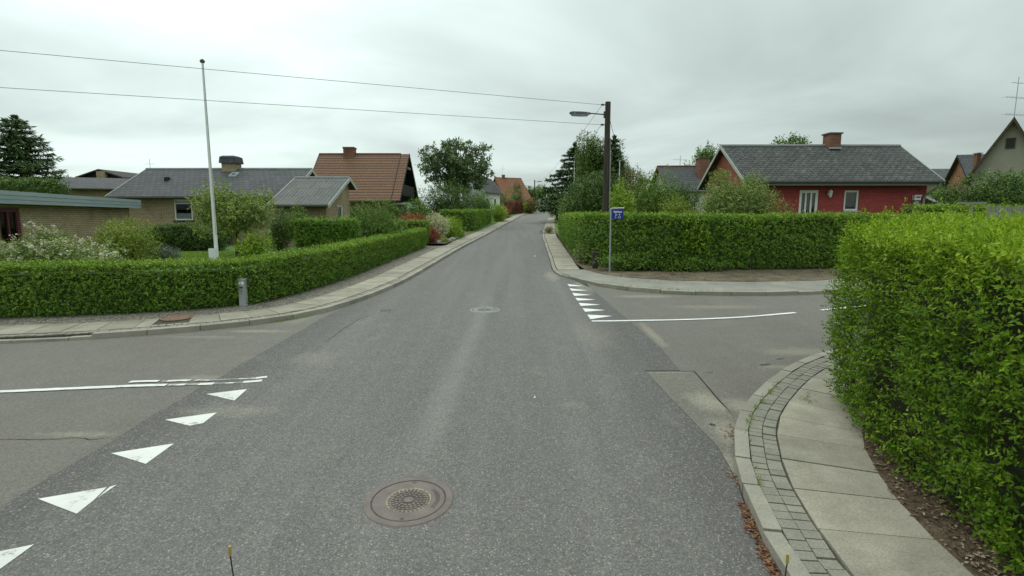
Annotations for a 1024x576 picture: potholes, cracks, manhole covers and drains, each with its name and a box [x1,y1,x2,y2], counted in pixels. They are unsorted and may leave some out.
manhole cover [362,477,454,528]
